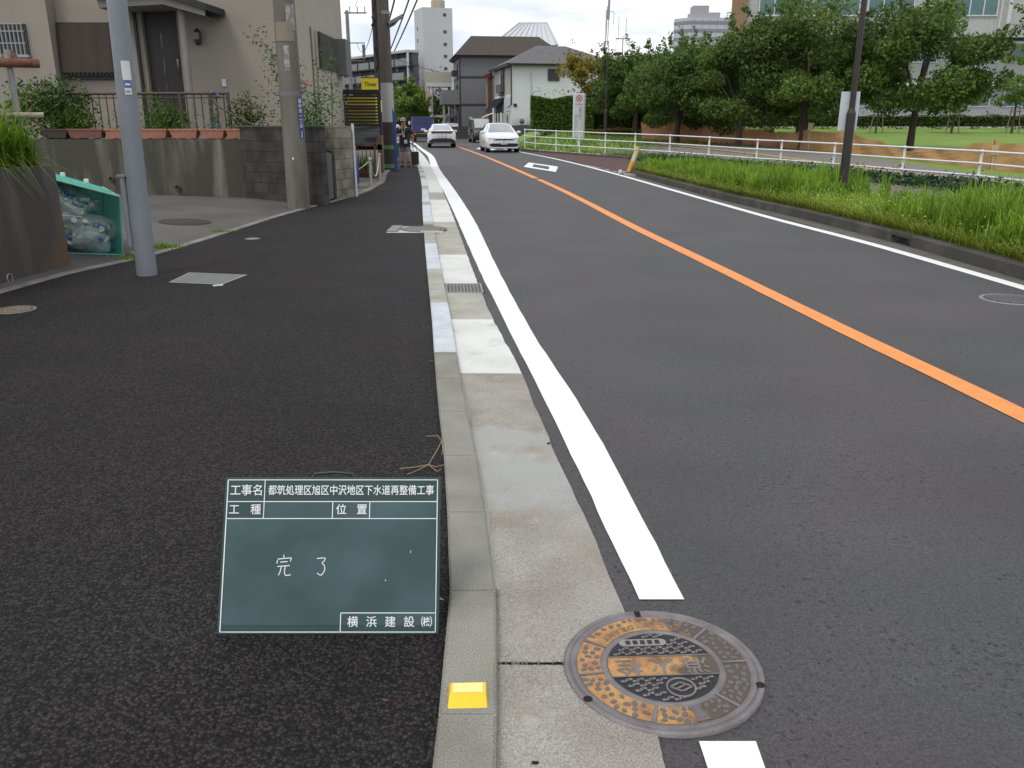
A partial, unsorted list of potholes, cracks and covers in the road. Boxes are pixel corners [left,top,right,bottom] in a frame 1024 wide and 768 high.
manhole cover [564,611,765,738]
manhole cover [0,305,37,314]
manhole cover [386,225,447,234]
drain grate [444,283,484,293]
manhole cover [979,294,1024,305]
